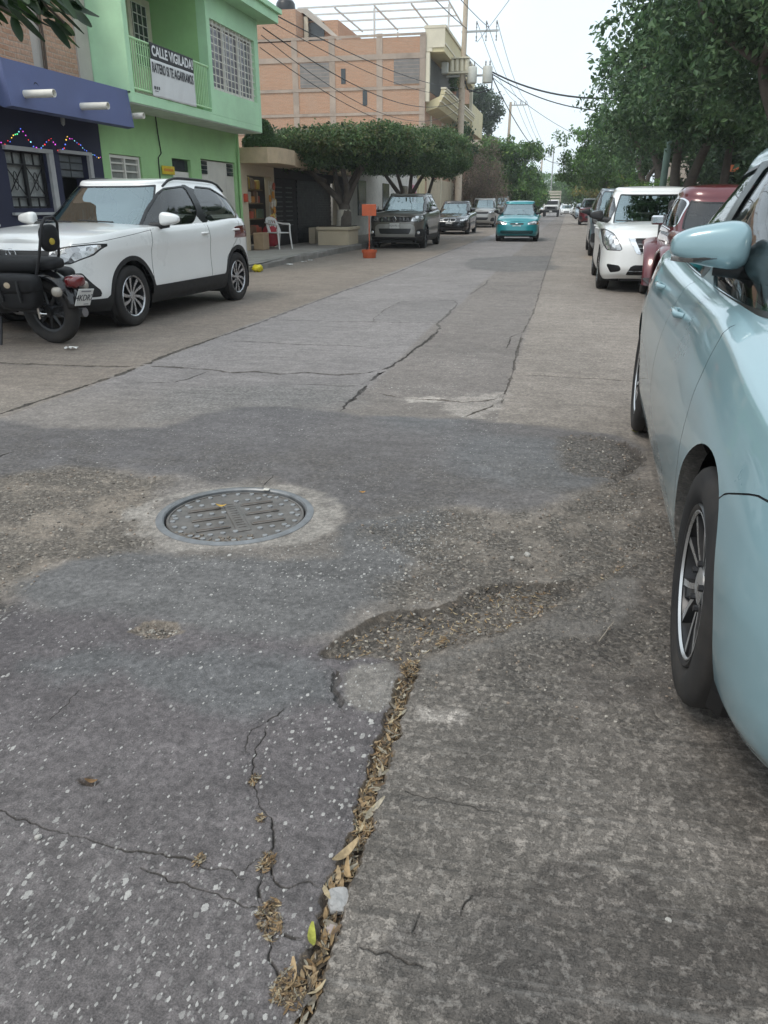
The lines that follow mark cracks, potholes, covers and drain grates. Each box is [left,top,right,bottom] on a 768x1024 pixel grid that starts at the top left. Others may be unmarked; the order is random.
pothole [129,621,183,639]
crack [403,788,502,817]
crack [0,707,327,1024]
crack [455,893,479,917]
pothole [319,560,634,677]
crack [43,690,84,722]
crack [0,280,507,418]
crack [357,912,427,975]
crack [503,332,531,349]
manhole cover [155,487,314,546]
